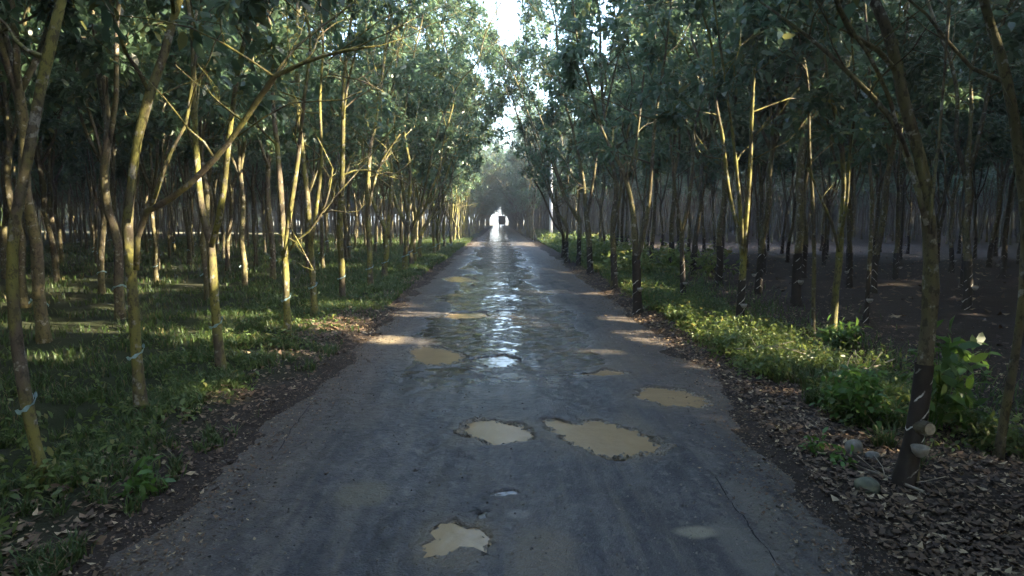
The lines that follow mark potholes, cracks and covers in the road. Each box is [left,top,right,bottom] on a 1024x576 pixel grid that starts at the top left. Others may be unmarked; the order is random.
pothole [534,415,685,465]
pothole [401,344,473,367]
pothole [625,383,724,411]
pothole [566,367,639,378]
pothole [476,486,532,500]
crack [277,402,314,453]
pothole [462,353,528,369]
pothole [407,513,508,566]
pothole [437,275,484,283]
crack [707,469,783,573]
pothole [439,310,500,321]
pothole [443,415,546,449]
